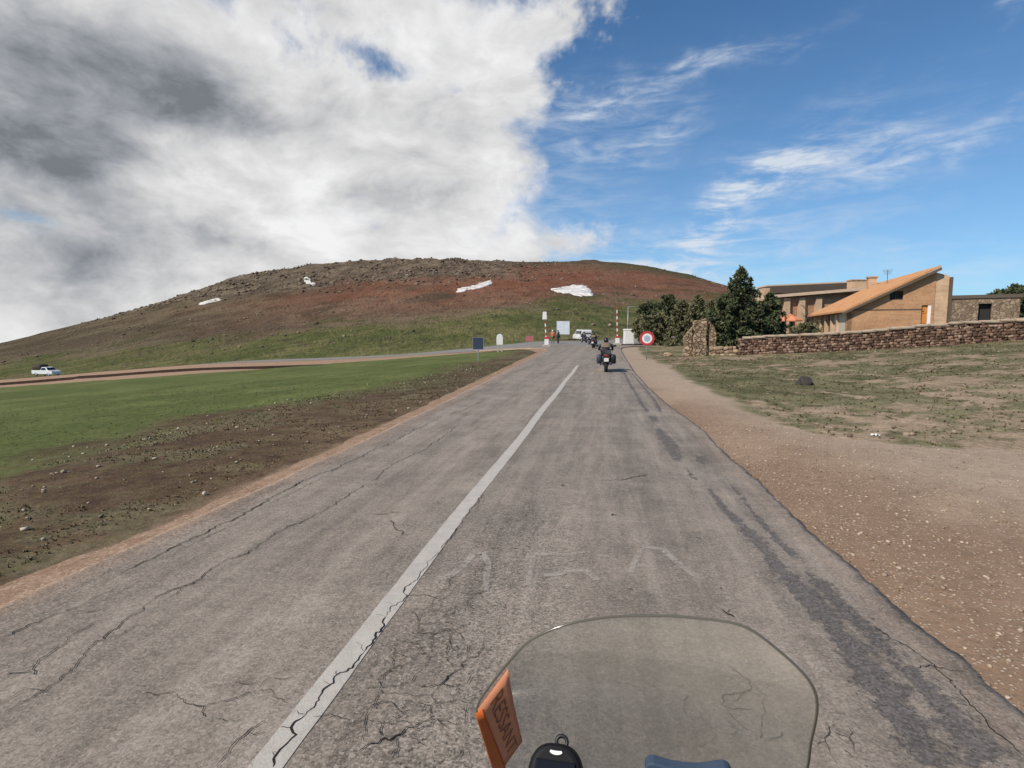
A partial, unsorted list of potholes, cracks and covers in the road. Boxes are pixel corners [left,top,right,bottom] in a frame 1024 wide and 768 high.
crack [874,626,1021,753]
crack [144,495,490,767]
crack [2,424,460,708]
